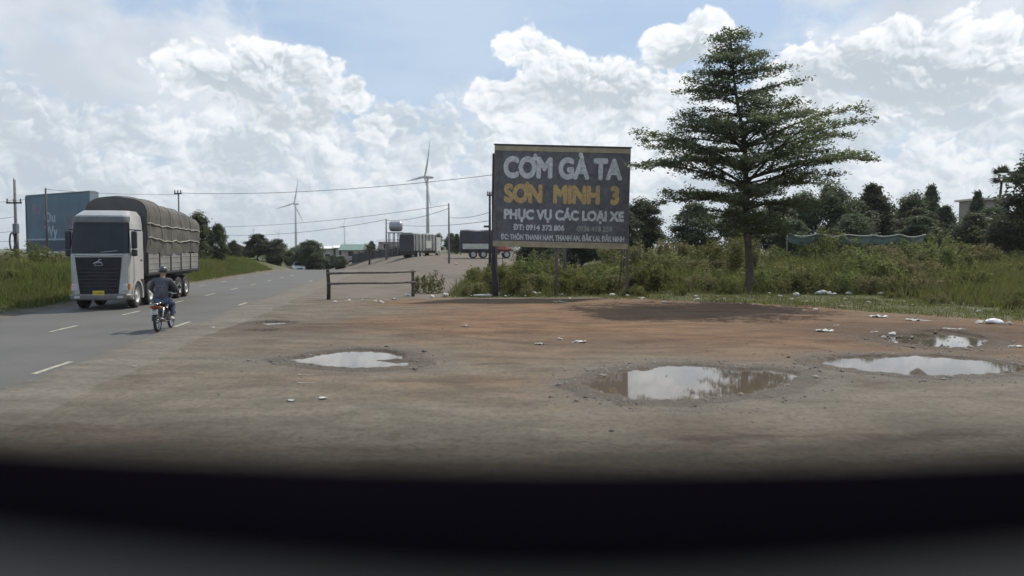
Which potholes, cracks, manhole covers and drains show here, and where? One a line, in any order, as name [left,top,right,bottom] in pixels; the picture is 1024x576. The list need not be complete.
pothole [555,361,823,407]
pothole [261,347,434,372]
pothole [795,353,1024,380]
pothole [859,329,1011,350]
